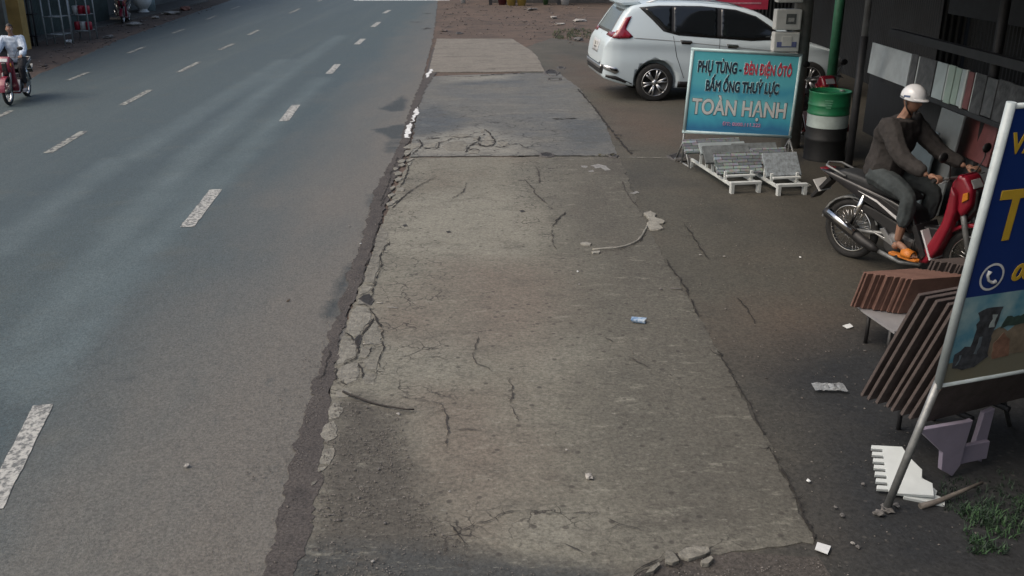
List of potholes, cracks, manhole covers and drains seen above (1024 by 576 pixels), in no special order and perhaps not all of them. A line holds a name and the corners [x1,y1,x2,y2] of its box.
crack [524,168,566,249]
crack [451,500,641,549]
crack [398,391,480,444]
crack [319,157,437,385]
crack [423,129,527,149]
crack [655,260,704,316]
